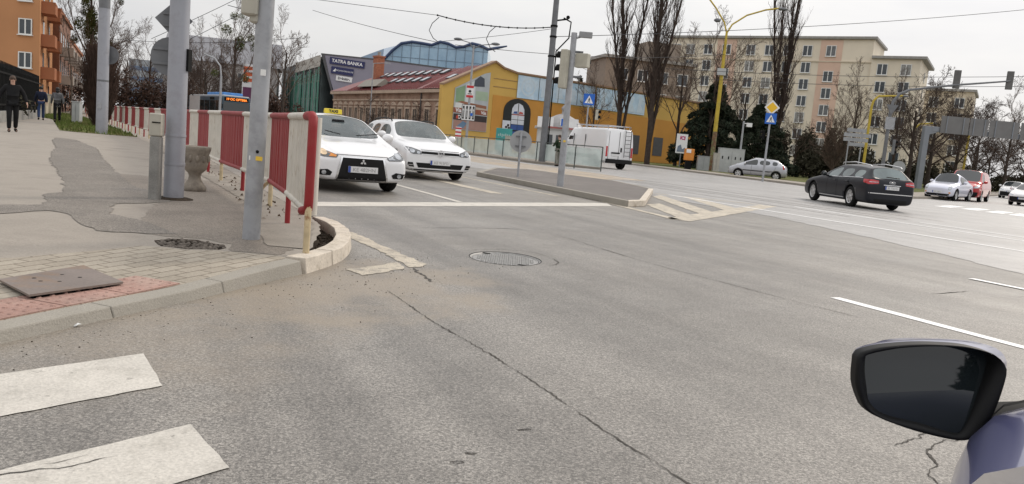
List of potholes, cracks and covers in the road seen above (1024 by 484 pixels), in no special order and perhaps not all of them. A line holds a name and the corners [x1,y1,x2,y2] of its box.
crack [895,433,957,484]
crack [0,454,112,475]
pothole [154,238,226,250]
manhole cover [469,251,542,266]
